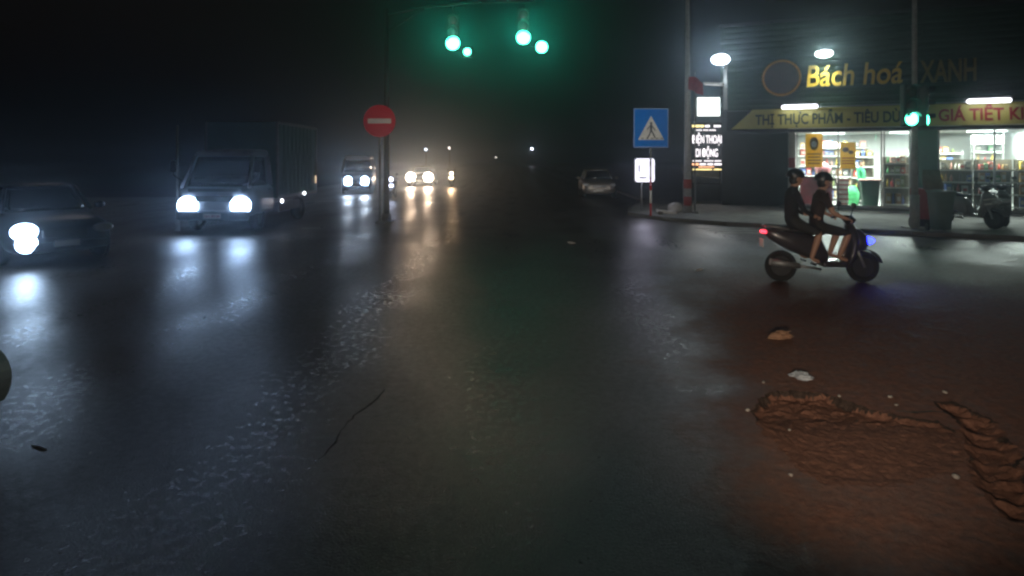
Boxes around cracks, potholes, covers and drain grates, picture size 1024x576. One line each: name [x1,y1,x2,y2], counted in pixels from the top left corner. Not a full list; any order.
pothole [933,401,1024,523]
pothole [750,390,967,488]
crack [315,389,385,463]
